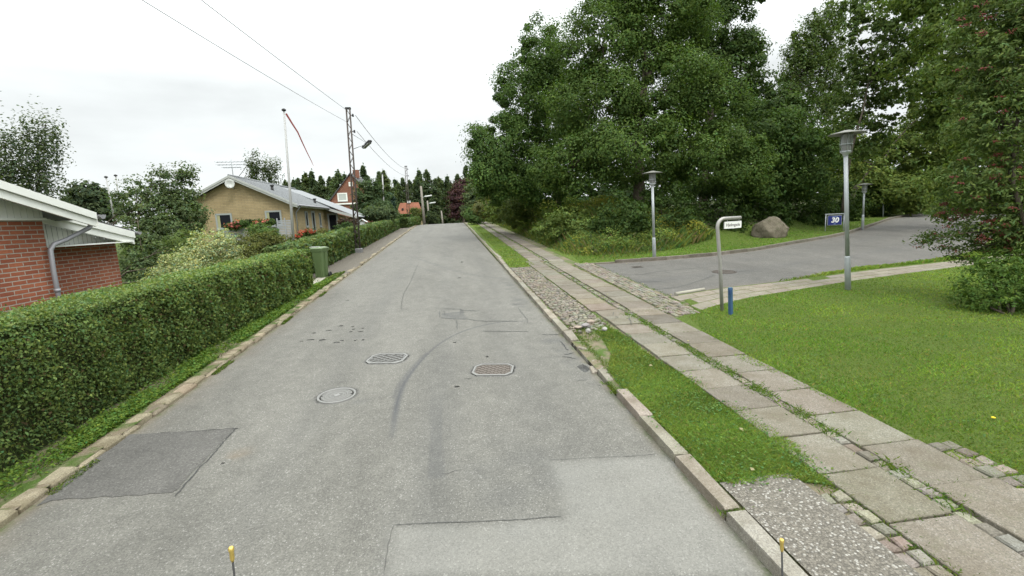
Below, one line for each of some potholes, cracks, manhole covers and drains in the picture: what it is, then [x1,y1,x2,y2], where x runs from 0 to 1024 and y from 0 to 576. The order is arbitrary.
manhole cover [316,387,356,404]
drain grate [366,353,408,364]
drain grate [472,363,514,376]
